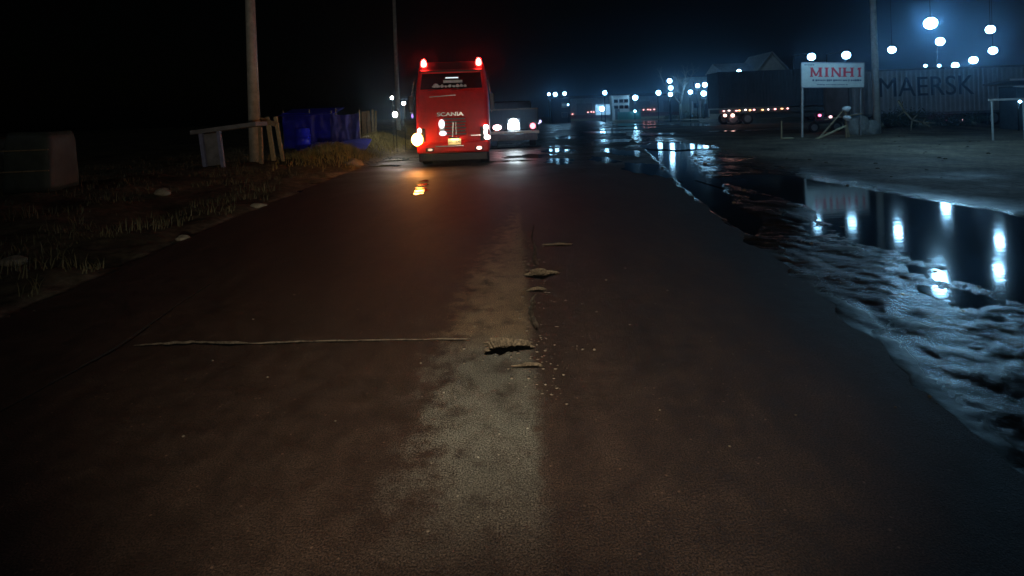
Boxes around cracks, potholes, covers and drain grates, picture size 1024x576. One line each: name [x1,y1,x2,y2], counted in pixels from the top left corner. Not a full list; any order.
pothole [483,337,535,356]
pothole [523,268,561,280]
crack [531,226,539,266]
crack [528,294,539,330]
